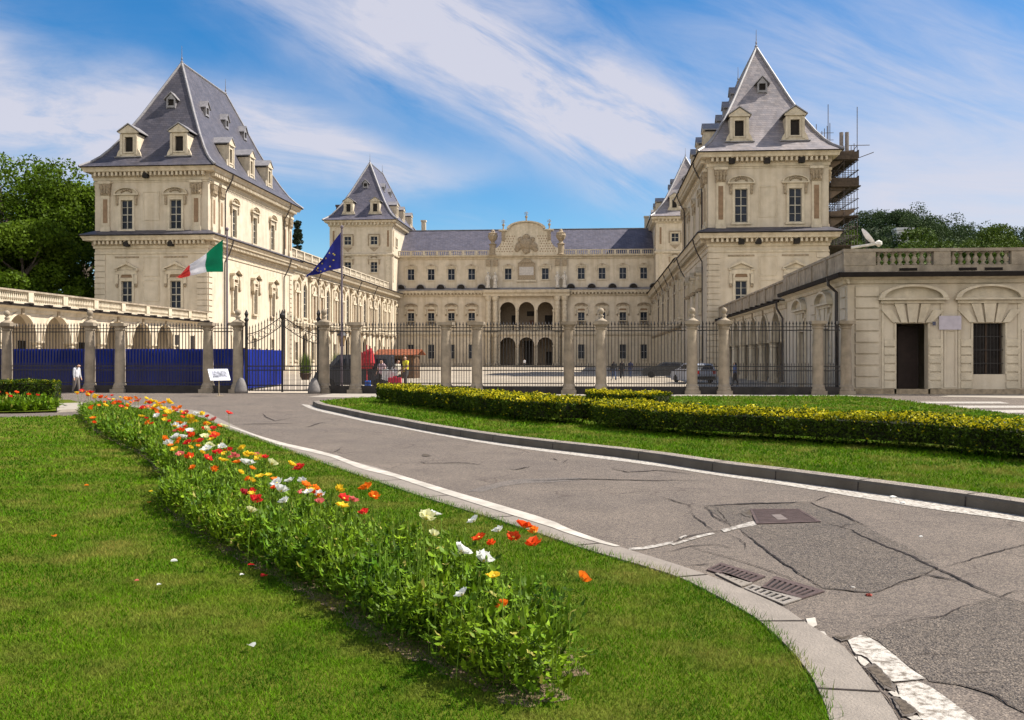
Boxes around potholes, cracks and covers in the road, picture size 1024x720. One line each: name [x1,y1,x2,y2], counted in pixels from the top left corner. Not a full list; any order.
crack [824,521,1024,628]
drain grate [744,576,825,606]
drain grate [707,562,765,588]
crack [668,498,817,587]
manhole cover [750,509,821,525]
